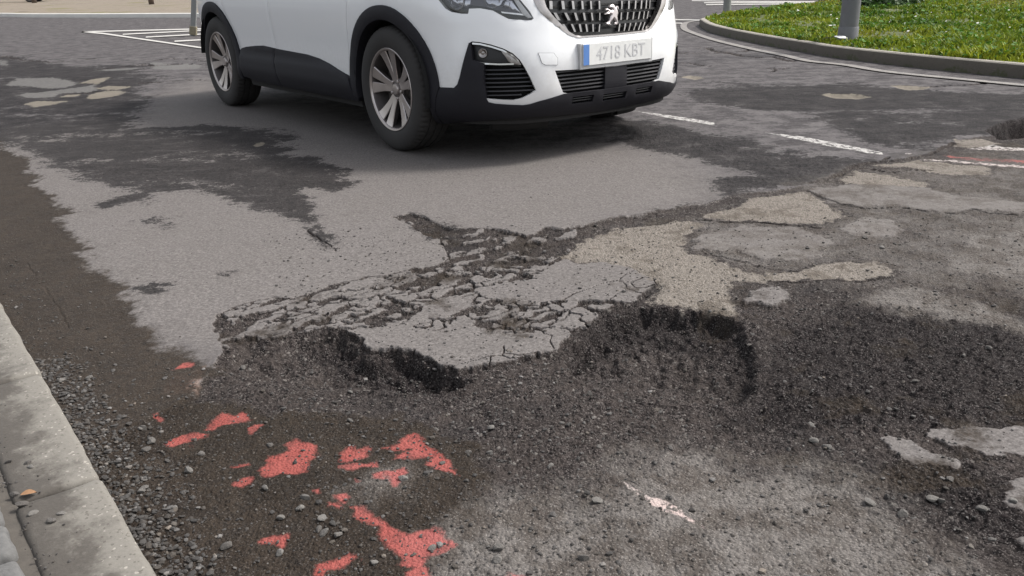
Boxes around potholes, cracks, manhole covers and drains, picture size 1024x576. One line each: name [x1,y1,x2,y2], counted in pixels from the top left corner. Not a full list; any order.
pothole [559,303,763,409]
pothole [984,117,1024,140]
pothole [216,326,474,399]
crack [213,212,657,365]
